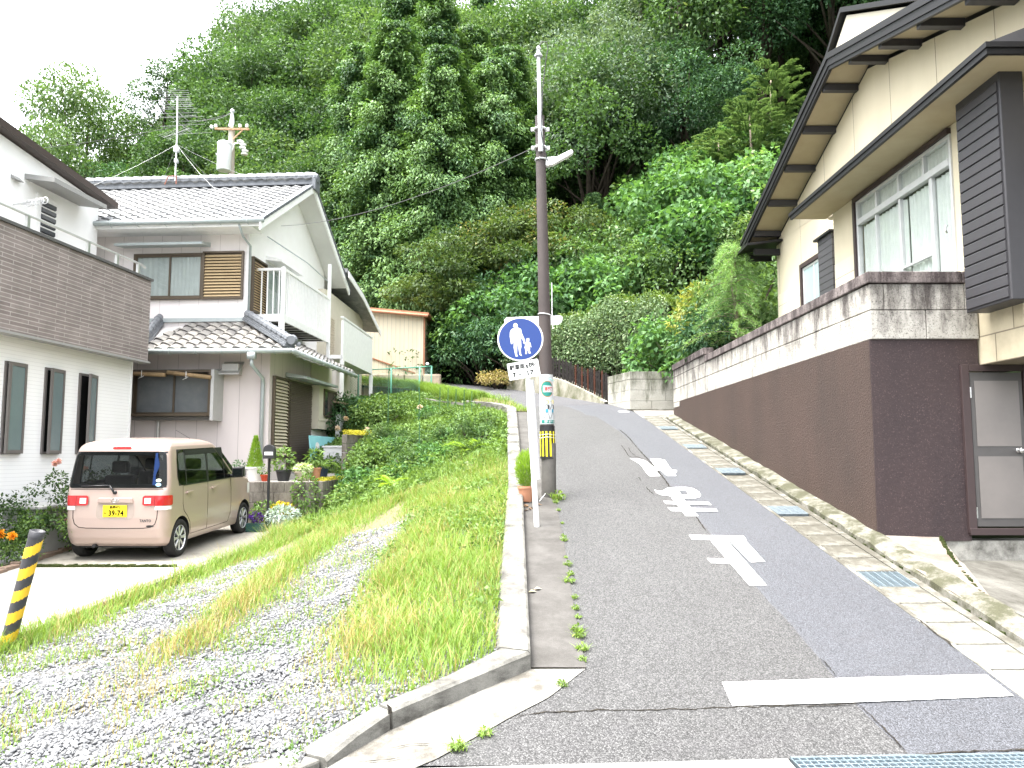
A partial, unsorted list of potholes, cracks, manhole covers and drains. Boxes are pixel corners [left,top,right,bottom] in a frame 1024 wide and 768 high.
drain grate [767,506,809,516]
drain grate [790,752,1024,768]
crack [620,430,669,494]
drain grate [857,571,920,587]
